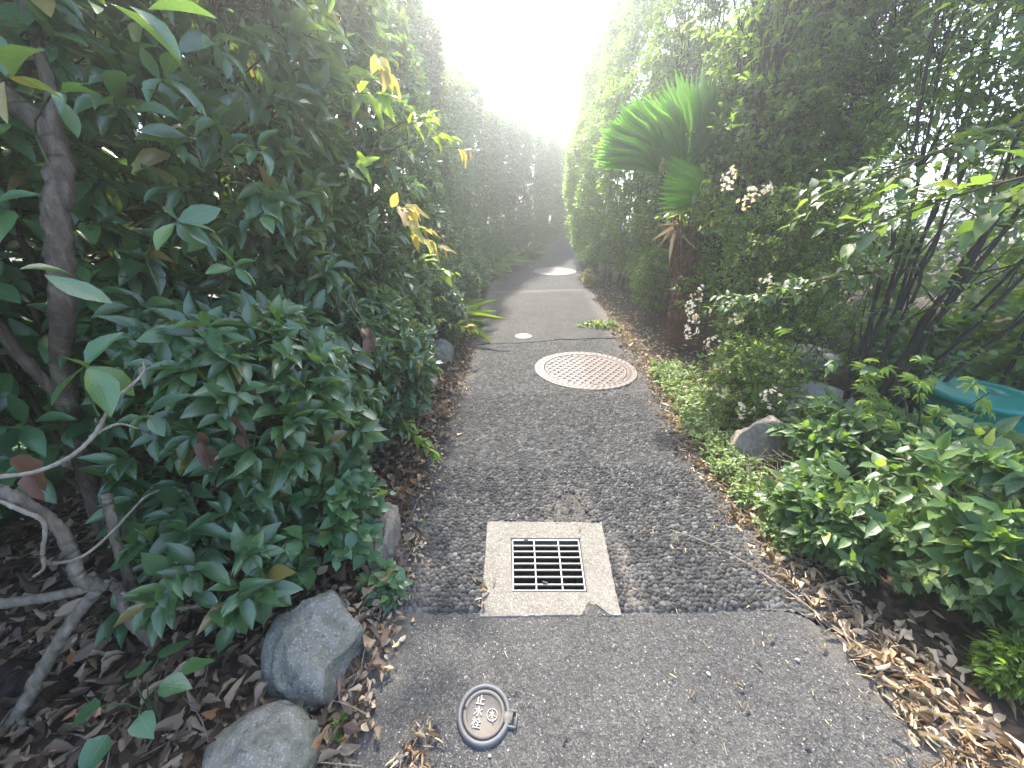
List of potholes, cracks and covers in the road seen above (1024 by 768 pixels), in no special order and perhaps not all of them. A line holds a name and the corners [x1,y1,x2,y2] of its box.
utility cover [457,684,518,749]
drain grate [479,521,622,618]
manhole cover [533,267,576,276]
manhole cover [535,352,638,391]
